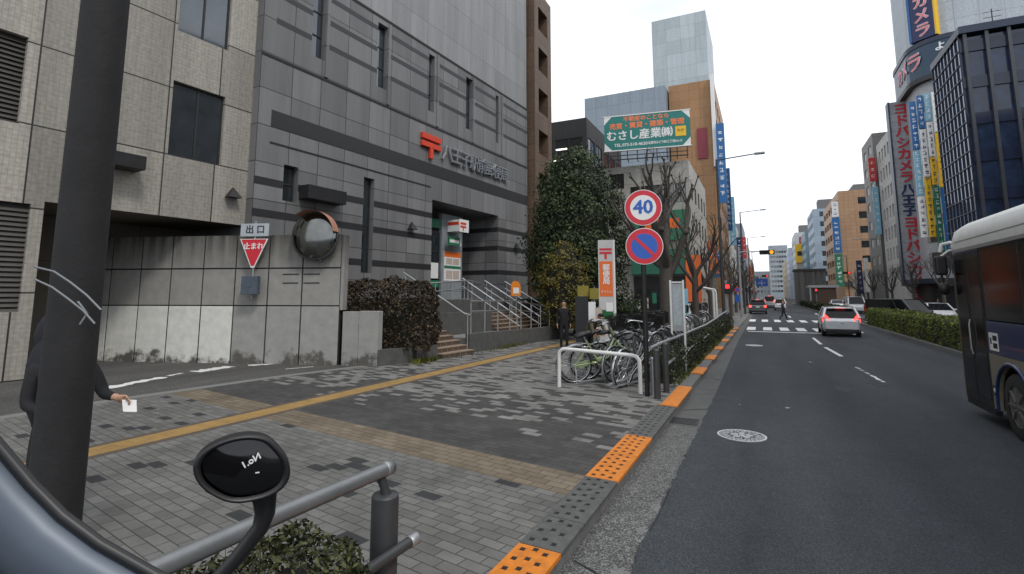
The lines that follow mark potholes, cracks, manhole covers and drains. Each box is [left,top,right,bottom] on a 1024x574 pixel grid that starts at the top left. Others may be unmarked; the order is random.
drain grate [669,417,700,426]
manhole cover [717,429,767,442]
